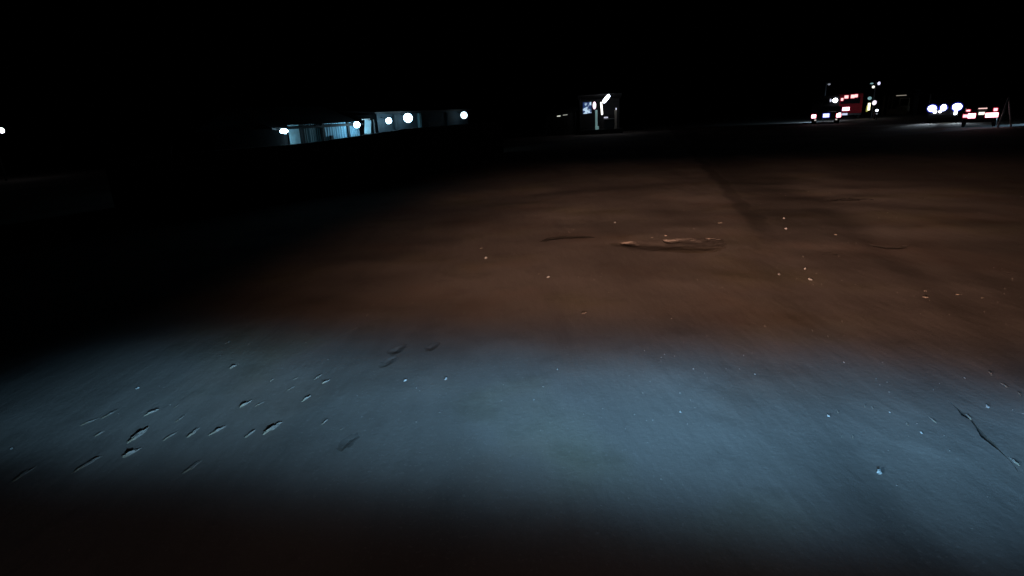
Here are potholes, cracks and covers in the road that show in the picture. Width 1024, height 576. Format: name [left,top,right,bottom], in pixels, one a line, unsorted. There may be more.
crack [948,400,1019,473]
pothole [336,432,360,451]
pothole [610,237,727,253]
pothole [386,343,407,356]
pothole [378,355,400,368]
